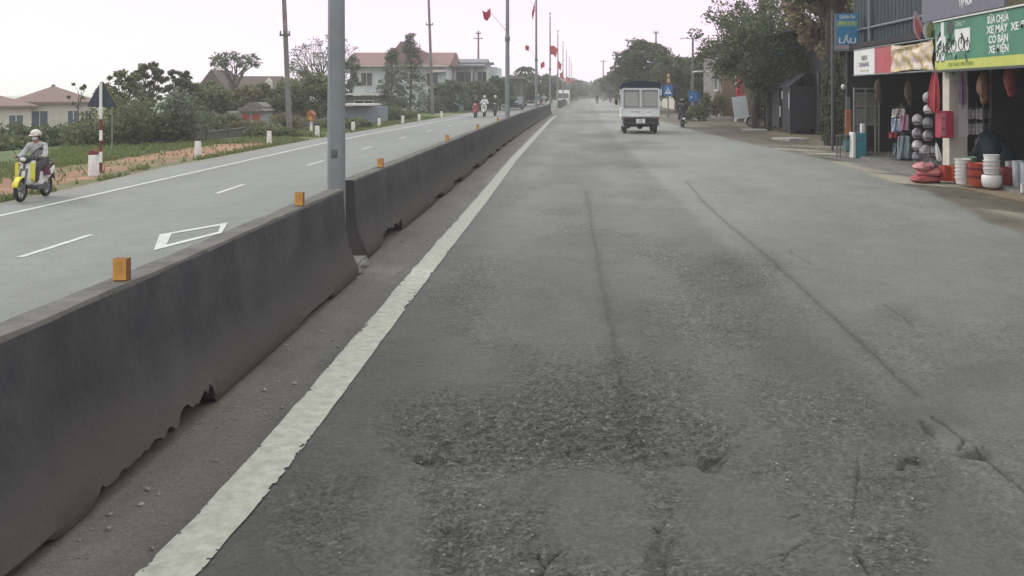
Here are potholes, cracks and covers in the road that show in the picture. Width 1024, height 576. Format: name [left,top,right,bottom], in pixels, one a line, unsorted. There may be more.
pothole [918,420,938,442]
crack [930,417,1024,493]
pothole [896,456,927,471]
crack [688,183,916,380]
pothole [956,446,995,465]
crack [585,191,626,384]
